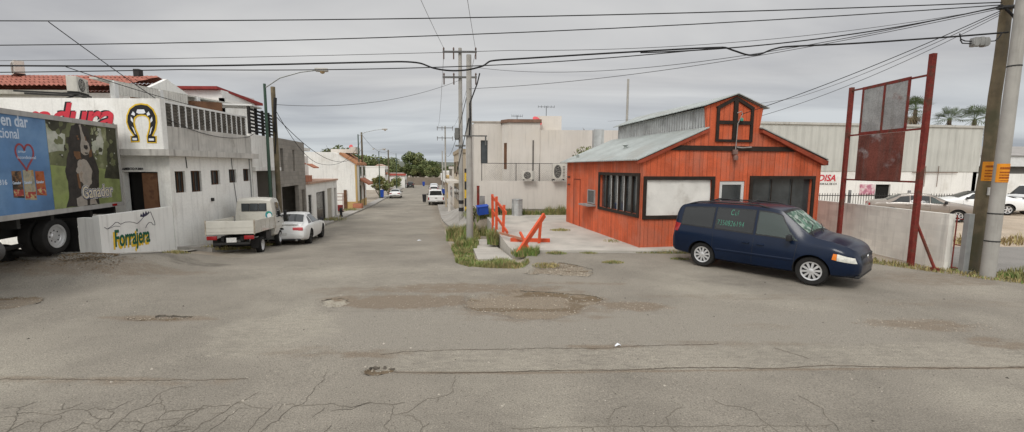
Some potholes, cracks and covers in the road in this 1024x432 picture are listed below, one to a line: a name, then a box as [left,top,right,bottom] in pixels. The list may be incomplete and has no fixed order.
pothole [364,366,396,376]
crack [516,397,839,432]
pothole [462,290,603,320]
crack [1,387,271,432]
crack [260,374,455,432]
crack [393,348,1021,373]
